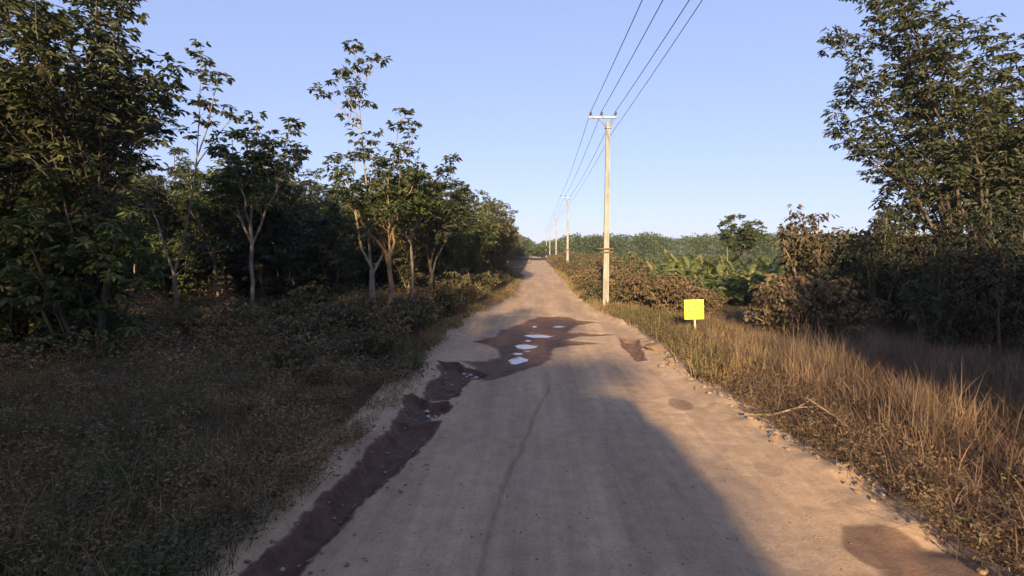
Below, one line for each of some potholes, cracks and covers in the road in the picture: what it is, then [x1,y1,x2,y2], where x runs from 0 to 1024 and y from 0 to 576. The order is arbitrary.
pothole [422,360,490,401]
pothole [618,338,648,362]
crack [471,372,557,576]
pothole [505,355,532,365]
pothole [402,393,454,426]
